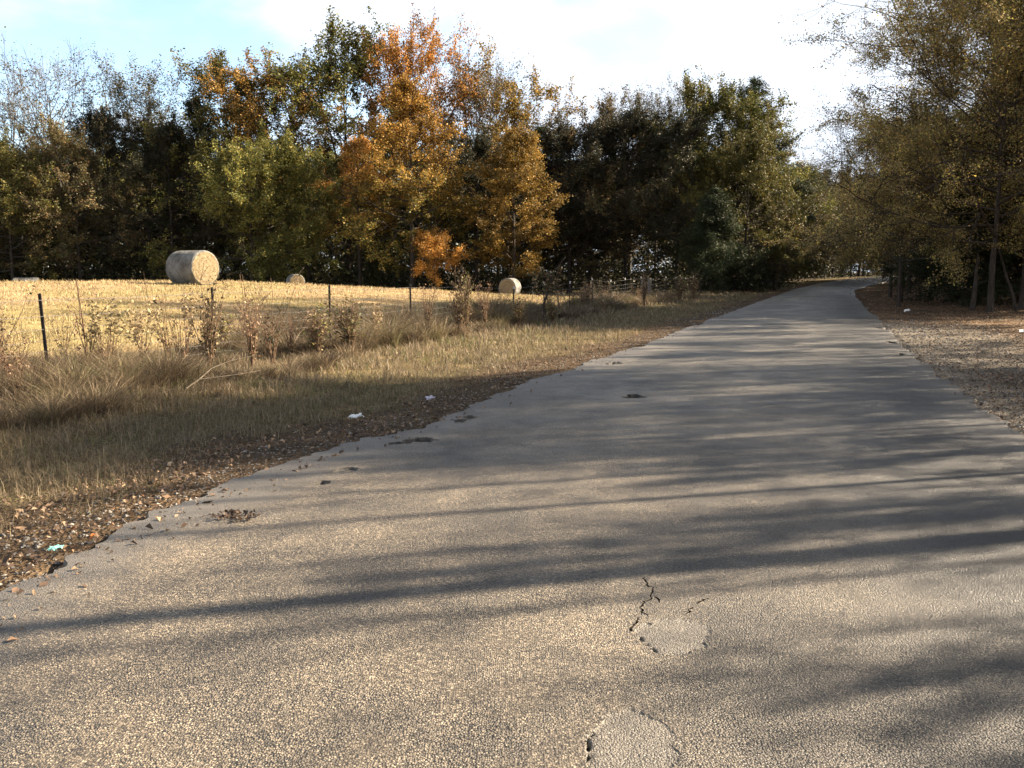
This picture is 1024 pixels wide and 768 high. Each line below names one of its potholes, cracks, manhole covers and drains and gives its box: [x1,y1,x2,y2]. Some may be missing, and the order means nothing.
pothole [582,708,682,768]
pothole [388,437,437,445]
crack [629,578,710,632]
pothole [634,618,711,655]
